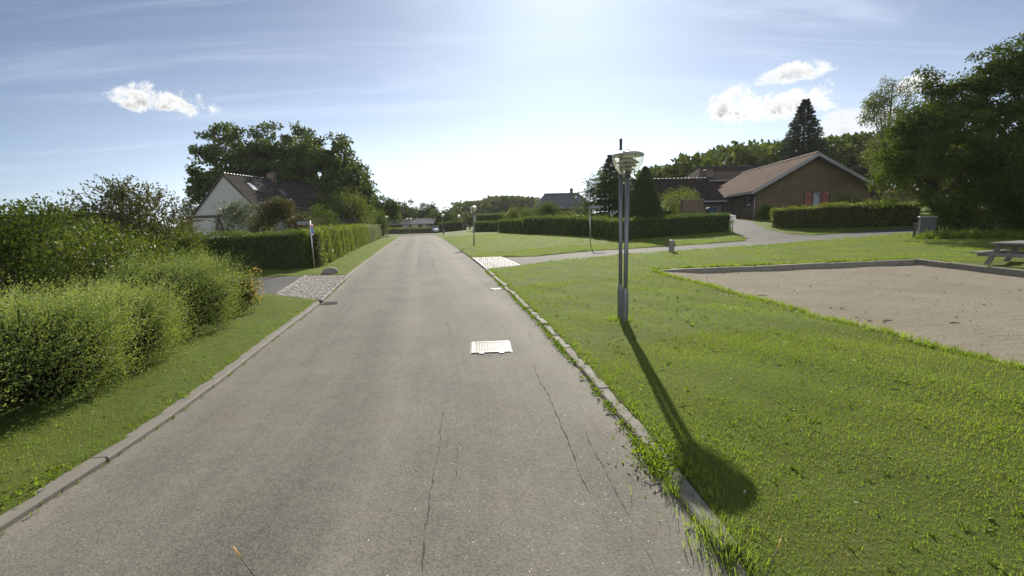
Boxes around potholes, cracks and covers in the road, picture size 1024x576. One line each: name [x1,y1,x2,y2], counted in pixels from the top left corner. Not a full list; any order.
crack [421,403,458,576]
crack [534,366,629,515]
